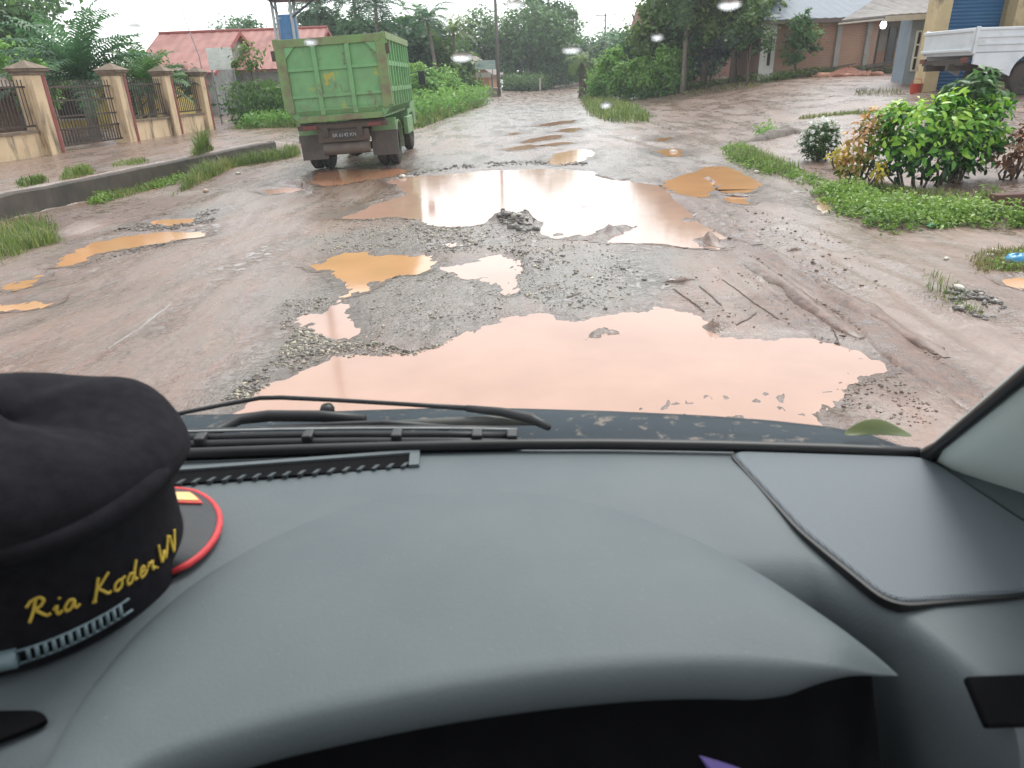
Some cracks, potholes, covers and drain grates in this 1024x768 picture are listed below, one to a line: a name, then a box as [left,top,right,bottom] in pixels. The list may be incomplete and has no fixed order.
pothole [302,166,418,187]
pothole [215,302,902,430]
pothole [514,133,574,144]
pothole [497,143,545,151]
pothole [653,163,774,198]
pothole [538,148,604,166]
pothole [296,247,446,301]
pothole [138,216,205,227]
pothole [37,228,216,269]
pothole [0,269,58,293]
pothole [644,147,696,157]
crack [673,279,817,325]
